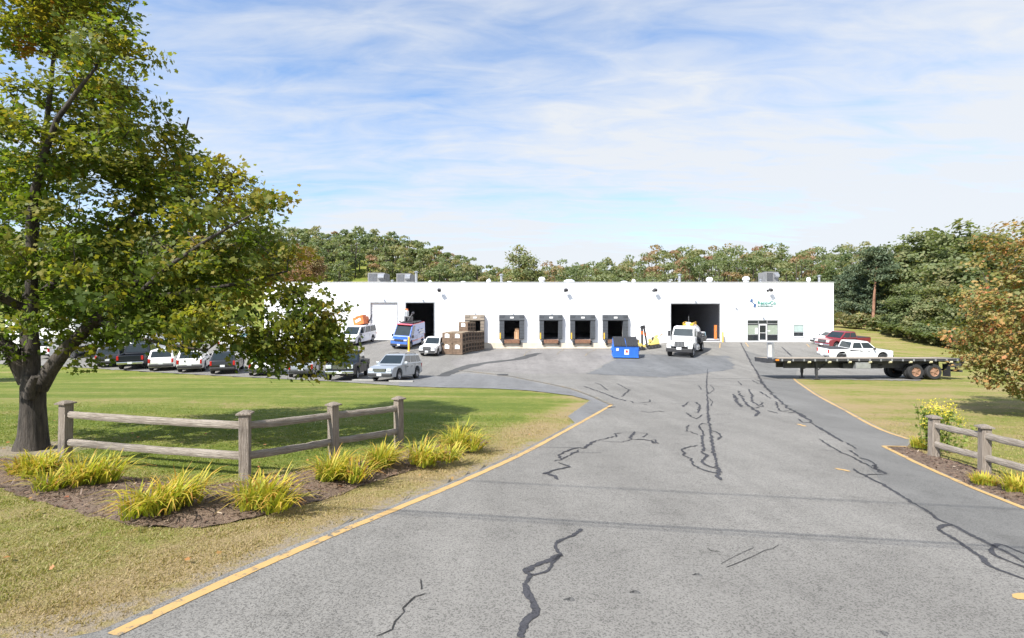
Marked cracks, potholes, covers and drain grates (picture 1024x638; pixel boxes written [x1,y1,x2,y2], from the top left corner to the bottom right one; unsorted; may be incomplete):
crack [376,579,425,636]
